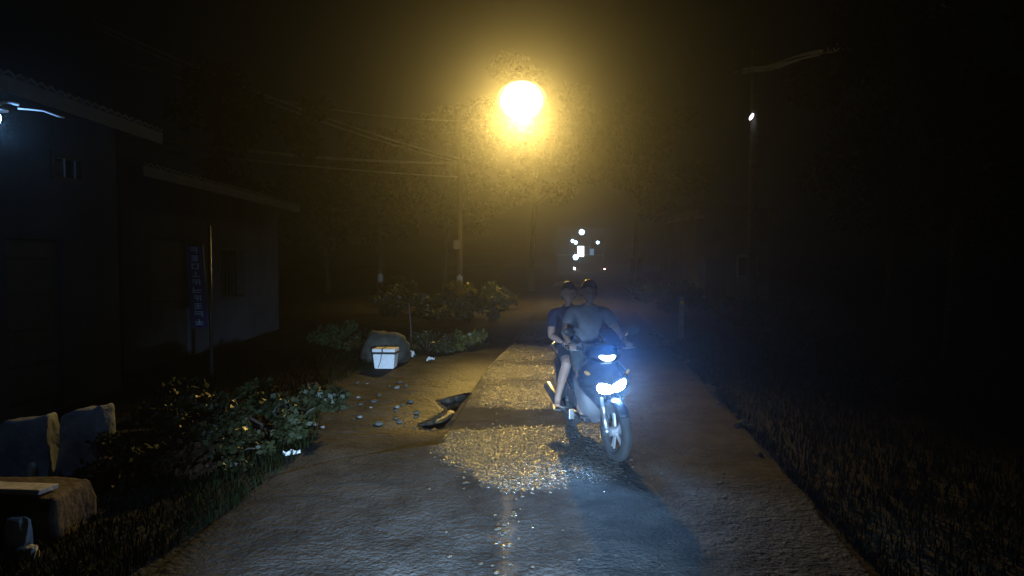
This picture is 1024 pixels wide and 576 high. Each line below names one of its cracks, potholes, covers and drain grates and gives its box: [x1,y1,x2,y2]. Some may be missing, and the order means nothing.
pothole [417,393,472,432]
